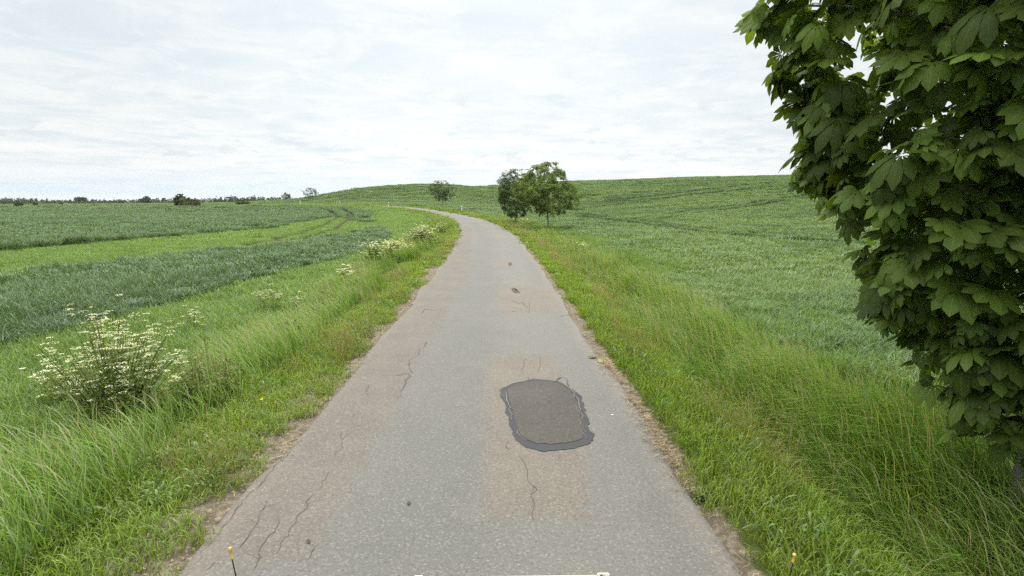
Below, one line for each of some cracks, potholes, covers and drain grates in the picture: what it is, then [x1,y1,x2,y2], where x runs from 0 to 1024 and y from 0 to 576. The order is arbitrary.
crack [191,444,328,568]
